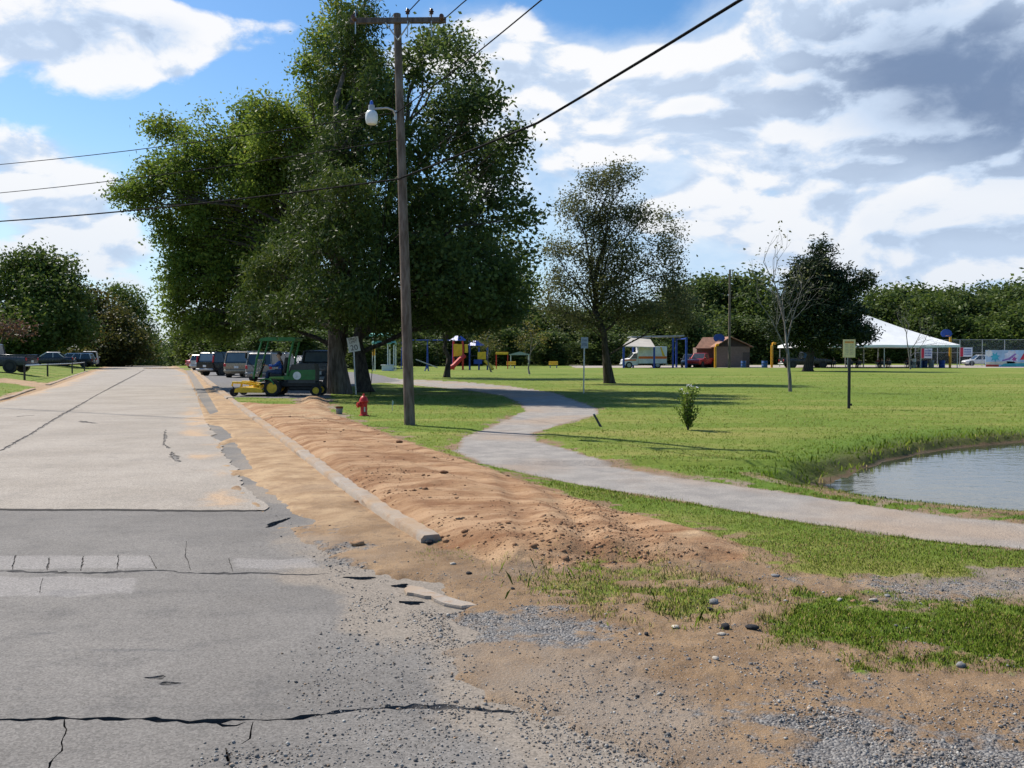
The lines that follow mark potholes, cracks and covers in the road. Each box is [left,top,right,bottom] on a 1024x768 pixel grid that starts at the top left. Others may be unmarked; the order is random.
crack [163,430,181,462]
crack [0,703,519,768]
